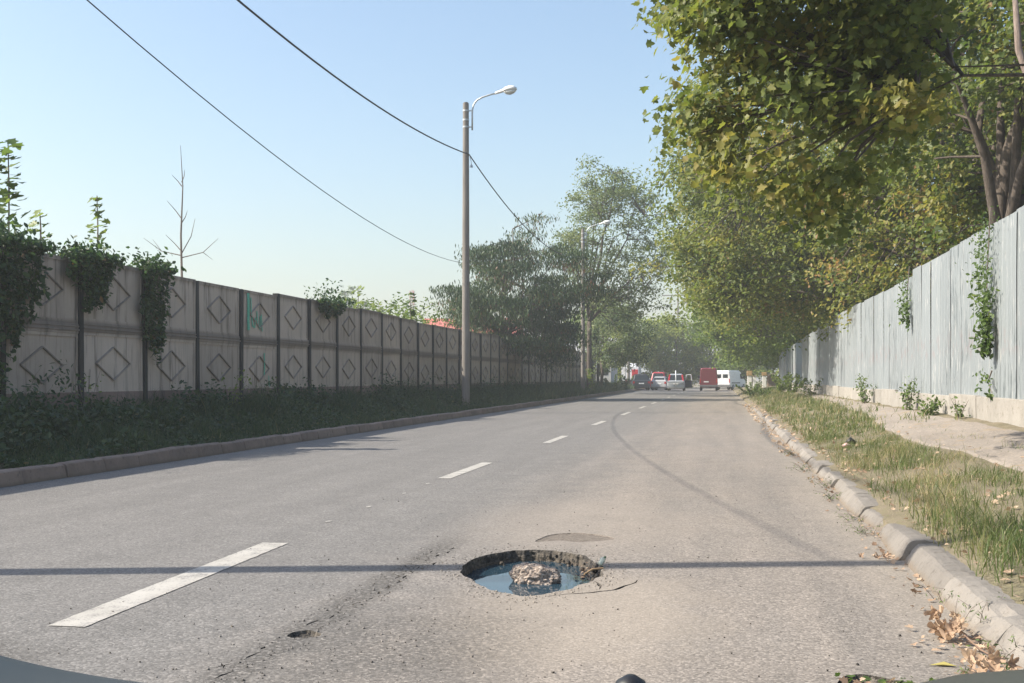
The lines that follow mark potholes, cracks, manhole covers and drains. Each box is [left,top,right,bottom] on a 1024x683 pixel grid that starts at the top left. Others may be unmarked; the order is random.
pothole [287,630,321,638]
pothole [460,550,604,577]
